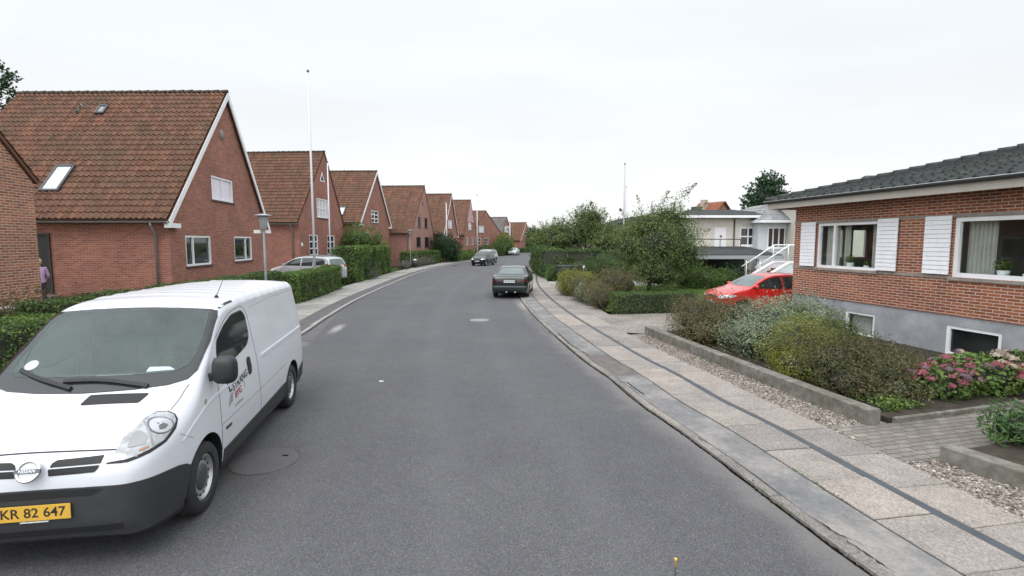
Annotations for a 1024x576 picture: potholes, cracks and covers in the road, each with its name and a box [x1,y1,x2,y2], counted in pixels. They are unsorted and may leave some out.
manhole cover [227,447,301,475]
